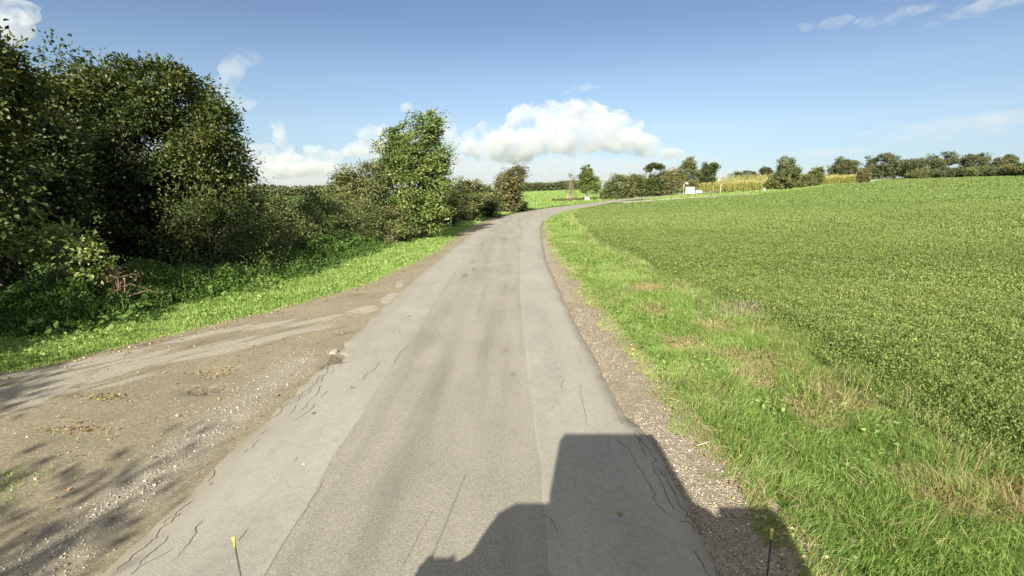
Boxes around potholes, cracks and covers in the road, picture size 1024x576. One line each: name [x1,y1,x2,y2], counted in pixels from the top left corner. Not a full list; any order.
crack [607,402,709,575]
crack [263,363,342,423]
crack [114,500,202,575]
